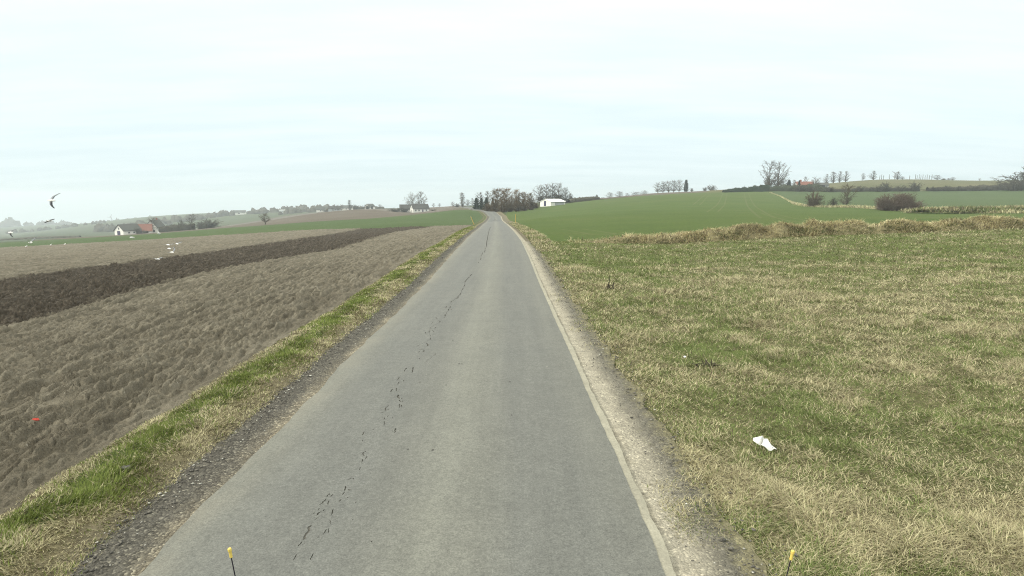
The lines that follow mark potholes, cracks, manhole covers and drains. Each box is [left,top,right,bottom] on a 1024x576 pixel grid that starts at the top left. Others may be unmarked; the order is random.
crack [381,219,497,433]
crack [293,432,372,560]
